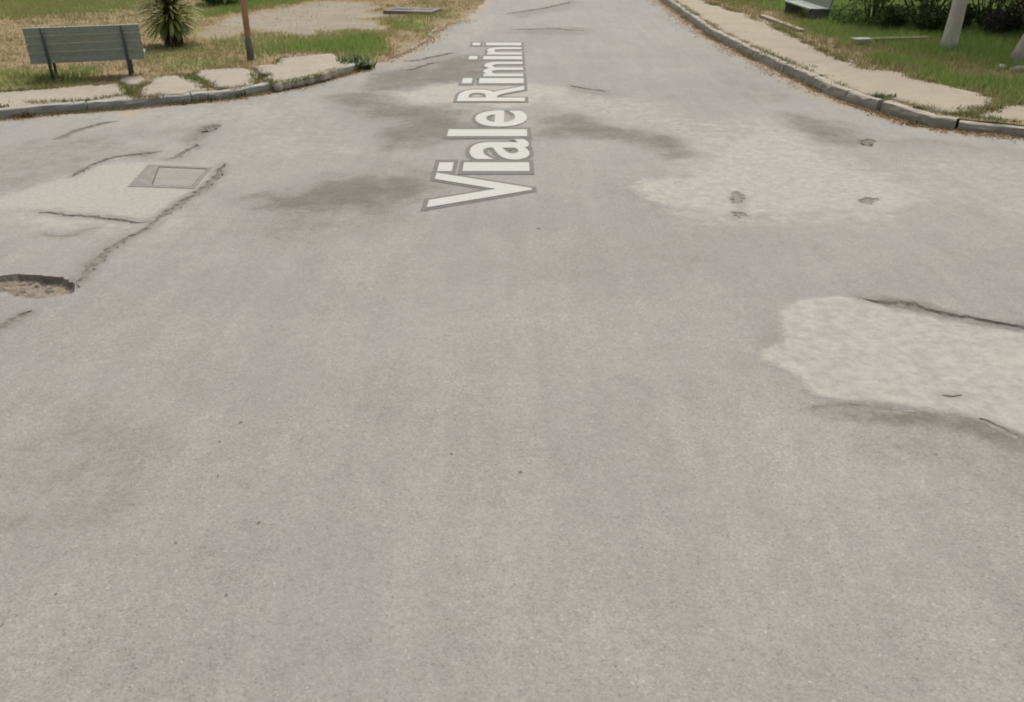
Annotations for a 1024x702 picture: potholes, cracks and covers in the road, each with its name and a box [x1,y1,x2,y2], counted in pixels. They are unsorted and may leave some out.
crack [980,419,1019,439]
crack [507,2,584,31]
crack [405,53,452,71]
crack [39,121,226,288]
pothole [0,274,75,299]
crack [865,299,1024,330]
pothole [729,192,745,204]
manhole cover [128,164,212,189]
